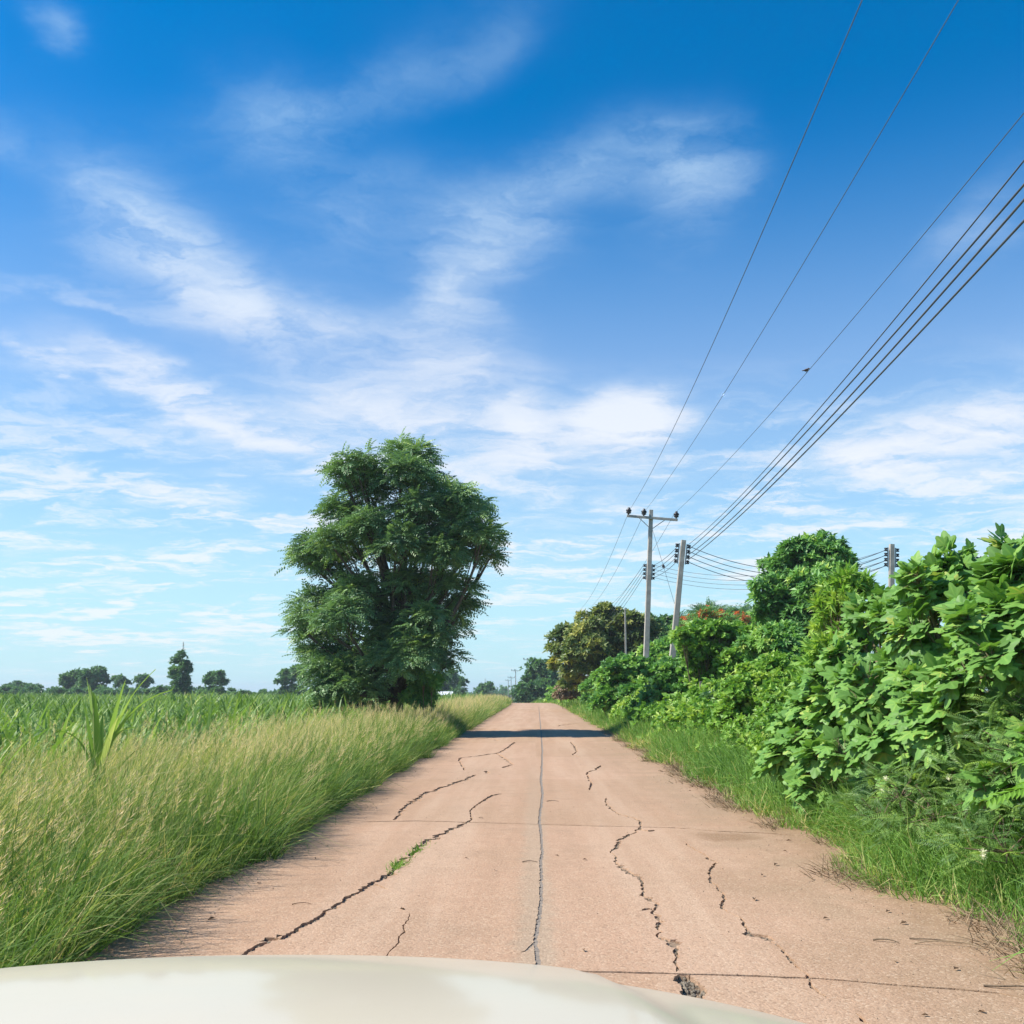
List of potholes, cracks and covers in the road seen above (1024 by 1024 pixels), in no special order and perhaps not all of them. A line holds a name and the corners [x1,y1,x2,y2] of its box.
pothole [673,975,708,999]
crack [241,711,1022,998]
